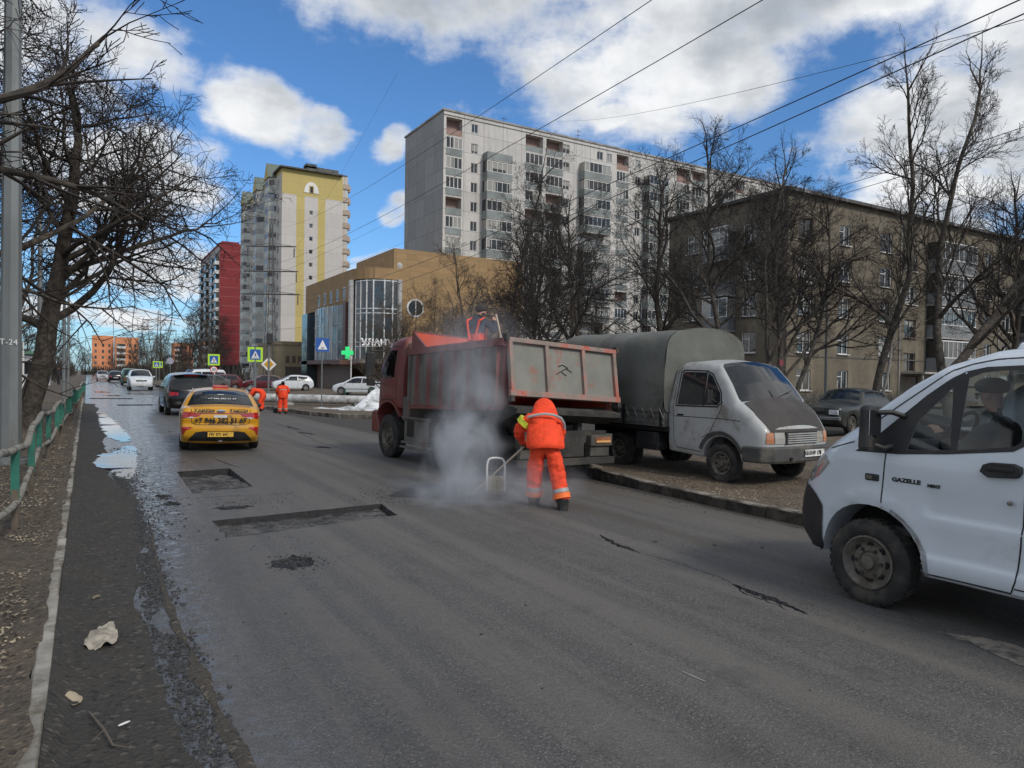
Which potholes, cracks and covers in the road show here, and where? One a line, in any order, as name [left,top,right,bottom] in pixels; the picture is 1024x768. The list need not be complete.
pothole [212,504,397,538]
crack [600,535,809,615]
pothole [269,555,315,570]
pothole [177,468,253,494]
